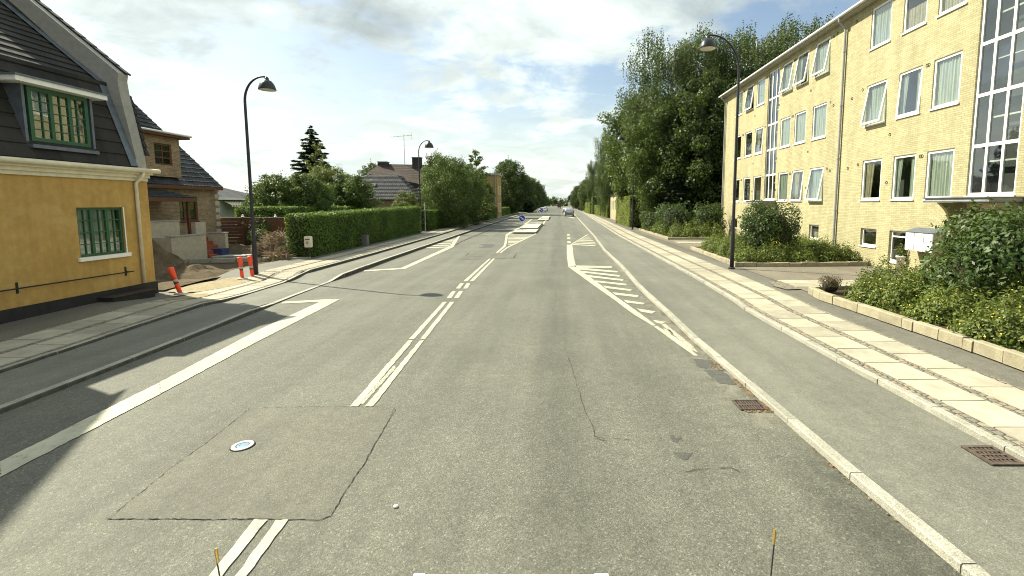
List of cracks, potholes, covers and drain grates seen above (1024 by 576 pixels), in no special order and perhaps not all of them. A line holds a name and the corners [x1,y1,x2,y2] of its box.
drain grate [961,445,1024,466]
manhole cover [230,440,256,452]
drain grate [732,400,767,411]
